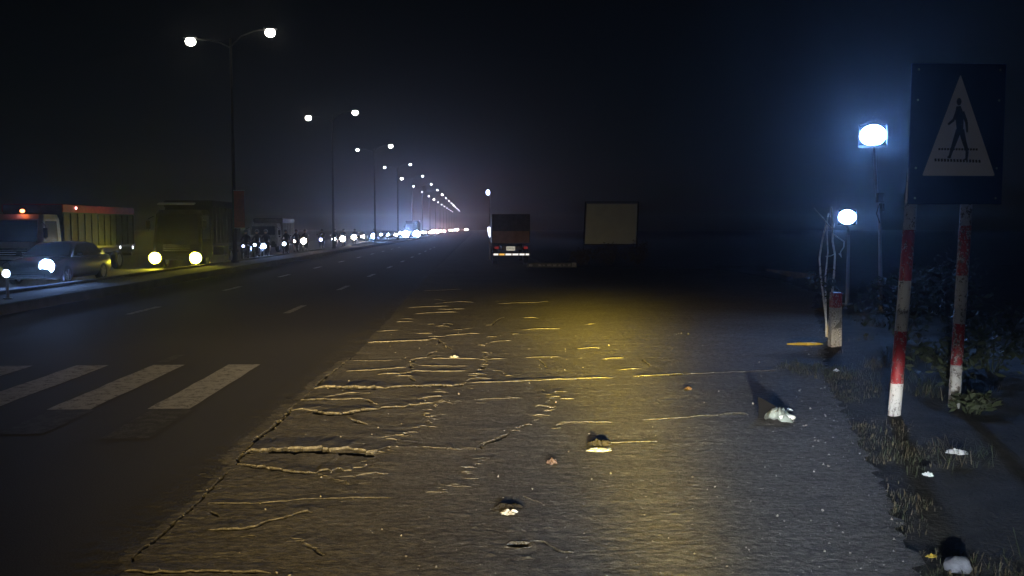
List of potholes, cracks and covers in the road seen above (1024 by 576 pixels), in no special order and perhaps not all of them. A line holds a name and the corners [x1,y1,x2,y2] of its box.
crack [116,289,661,576]
crack [640,411,749,422]
pothole [505,541,533,549]
